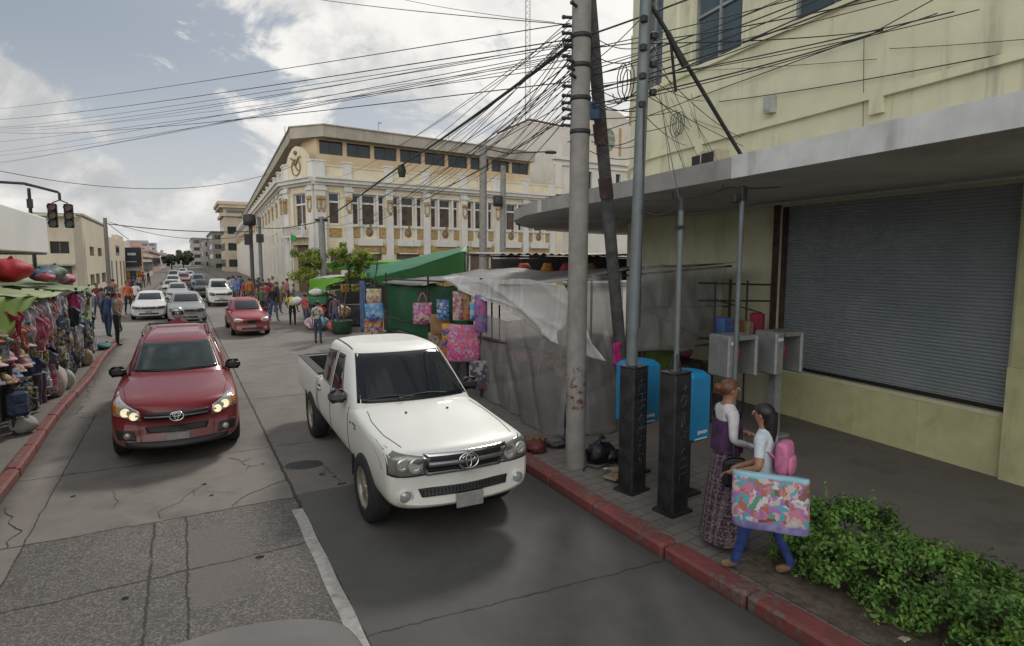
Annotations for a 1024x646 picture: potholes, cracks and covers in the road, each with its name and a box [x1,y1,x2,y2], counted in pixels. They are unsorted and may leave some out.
manhole cover [284,460,323,470]
